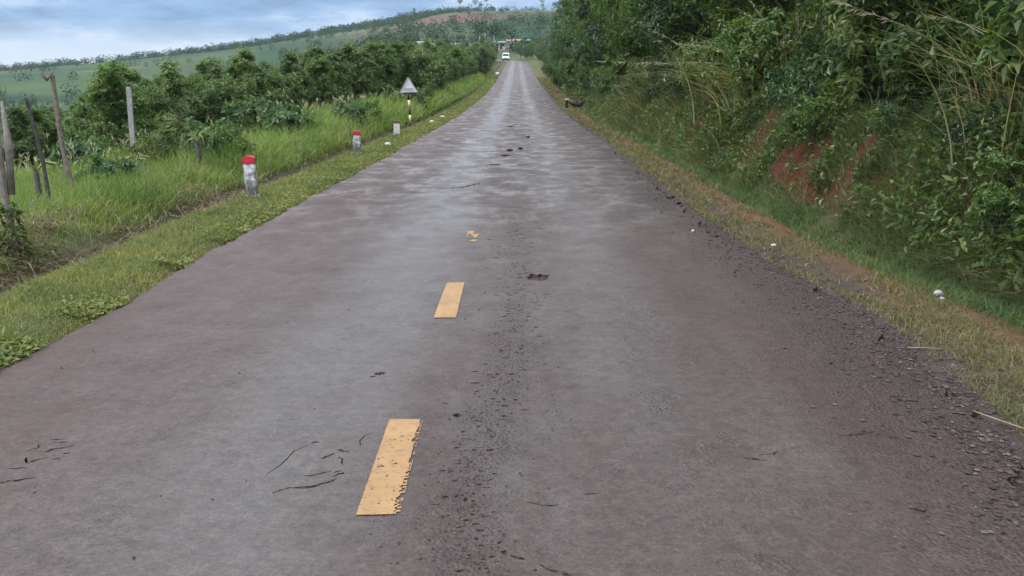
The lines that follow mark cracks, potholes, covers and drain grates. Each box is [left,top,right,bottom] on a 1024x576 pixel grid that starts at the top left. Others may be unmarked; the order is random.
crack [740,451,779,461]
crack [0,439,74,484]
crack [266,432,374,493]
